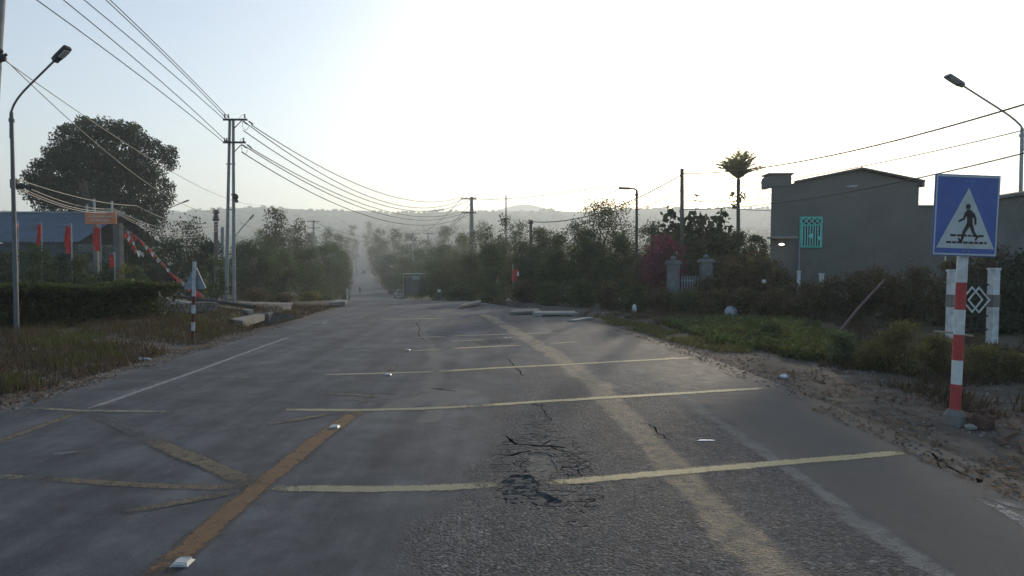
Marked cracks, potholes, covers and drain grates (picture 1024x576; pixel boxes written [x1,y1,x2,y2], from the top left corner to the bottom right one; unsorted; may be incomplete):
pothole [500,475,562,506]
pothole [526,452,557,481]
crack [476,339,524,376]
crack [489,404,604,528]
